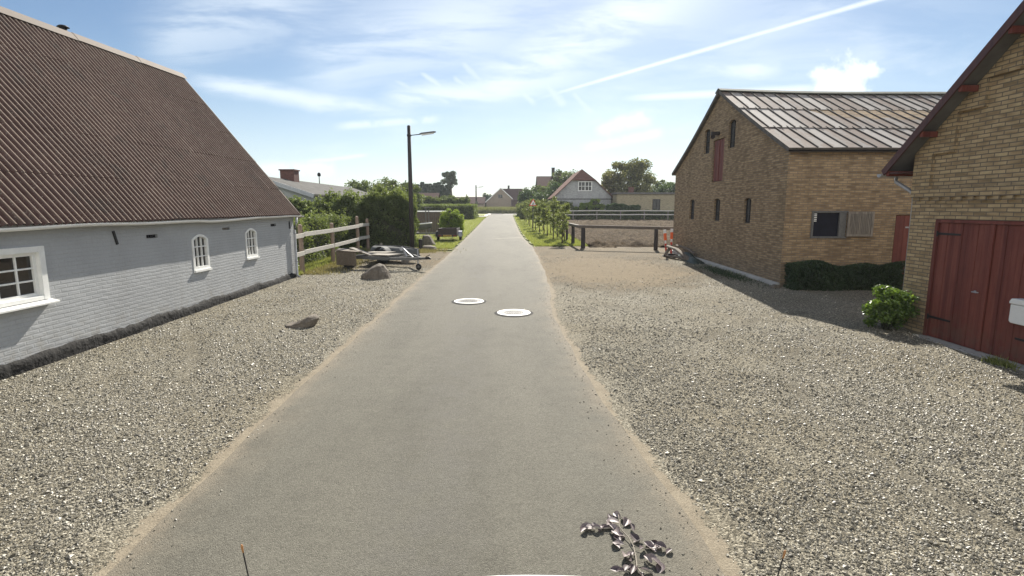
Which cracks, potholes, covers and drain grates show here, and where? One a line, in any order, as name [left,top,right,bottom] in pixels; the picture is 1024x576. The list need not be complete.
manhole cover [494,309,533,317]
